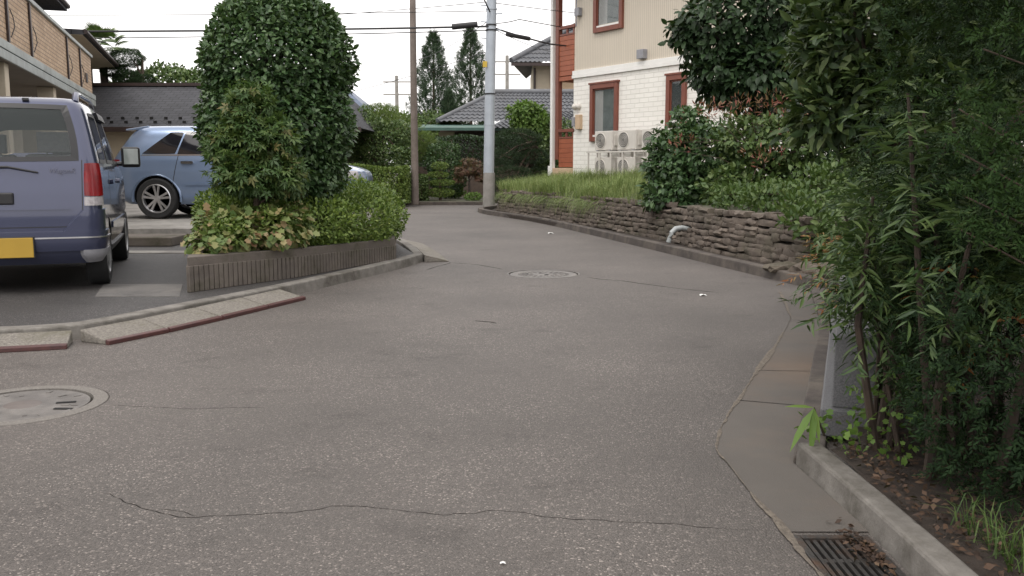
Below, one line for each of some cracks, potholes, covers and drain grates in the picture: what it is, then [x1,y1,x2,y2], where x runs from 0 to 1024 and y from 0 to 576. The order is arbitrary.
crack [90,491,761,531]
drain grate [793,535,906,576]
manhole cover [0,385,110,426]
manhole cover [507,270,580,278]
